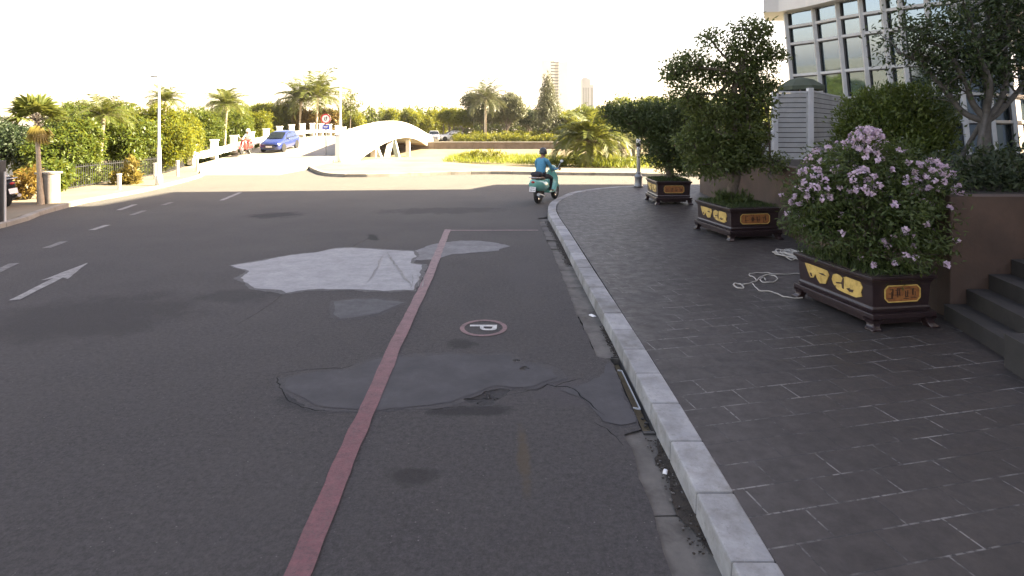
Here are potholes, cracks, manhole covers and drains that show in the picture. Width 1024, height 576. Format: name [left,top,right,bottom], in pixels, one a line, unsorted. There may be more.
crack [509,378,623,445]
pothole [464,388,510,406]
